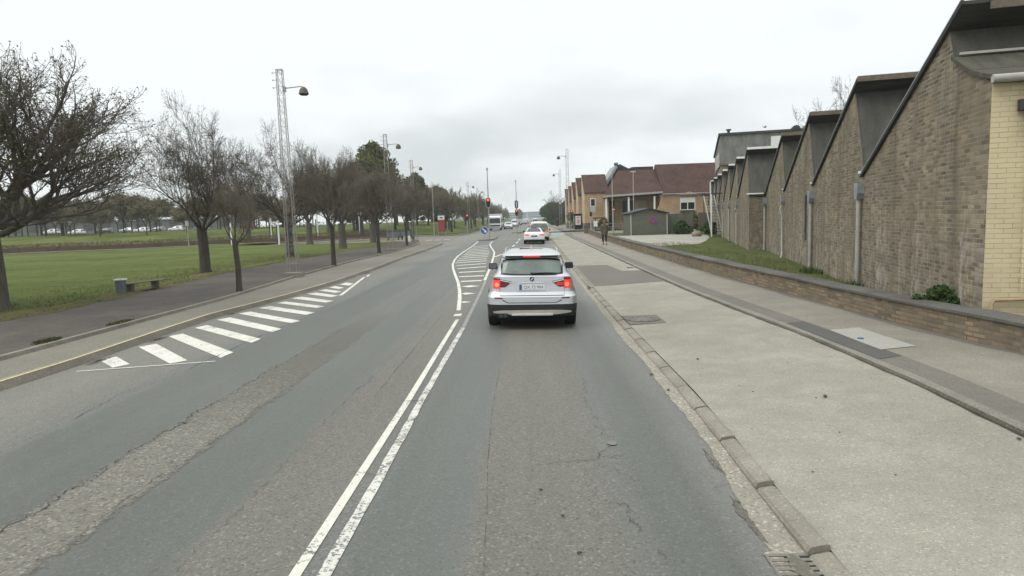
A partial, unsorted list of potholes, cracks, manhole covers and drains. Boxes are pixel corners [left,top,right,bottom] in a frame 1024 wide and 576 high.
manhole cover [622,315,667,325]
crack [548,376,635,481]
drain grate [764,553,823,576]
